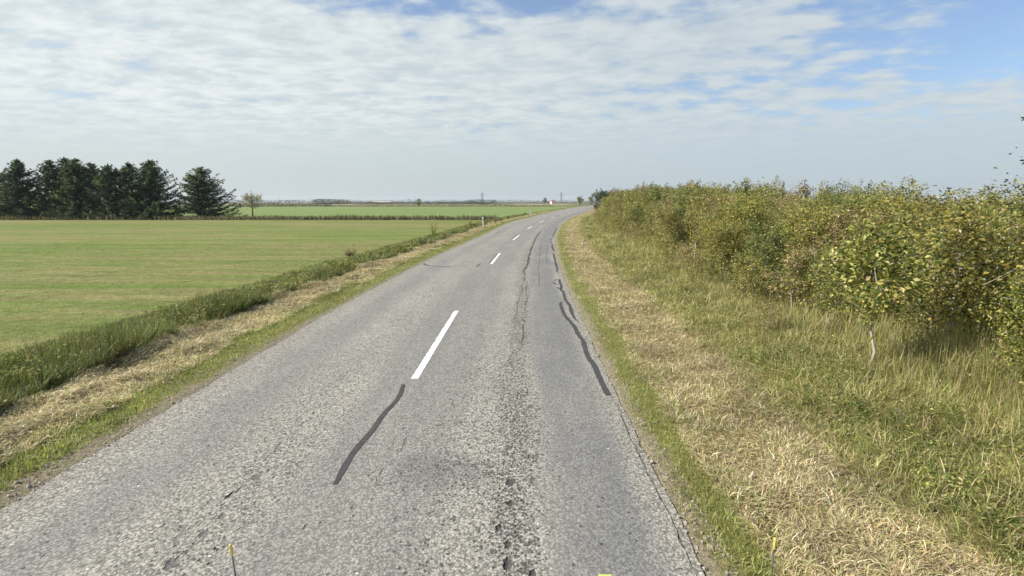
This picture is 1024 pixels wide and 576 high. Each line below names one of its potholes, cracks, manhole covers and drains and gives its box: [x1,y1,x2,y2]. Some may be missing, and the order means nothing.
crack [467,229,547,345]
